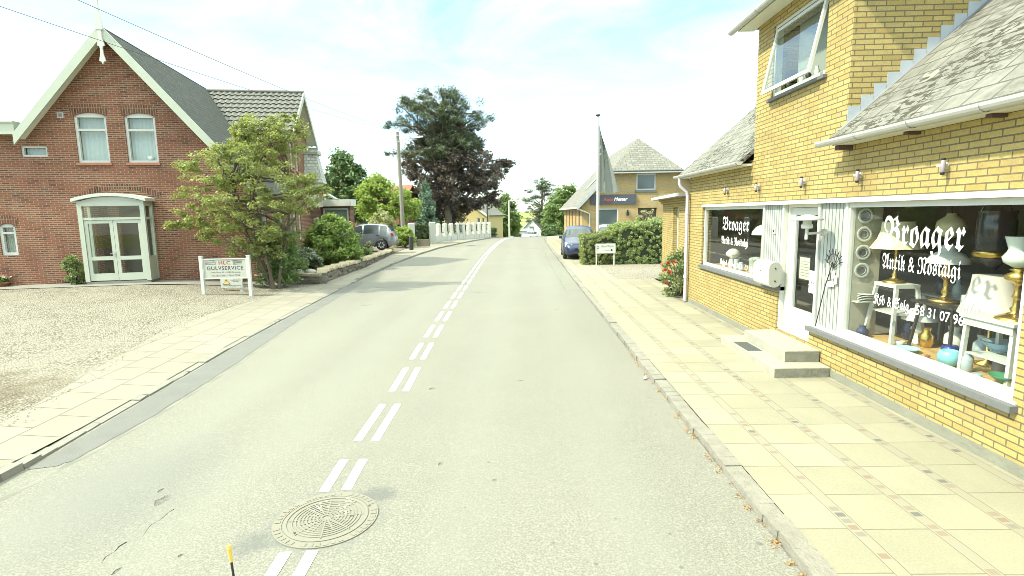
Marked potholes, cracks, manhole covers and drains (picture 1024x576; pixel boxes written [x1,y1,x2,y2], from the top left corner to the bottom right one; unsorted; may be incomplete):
manhole cover [271,492,378,549]
